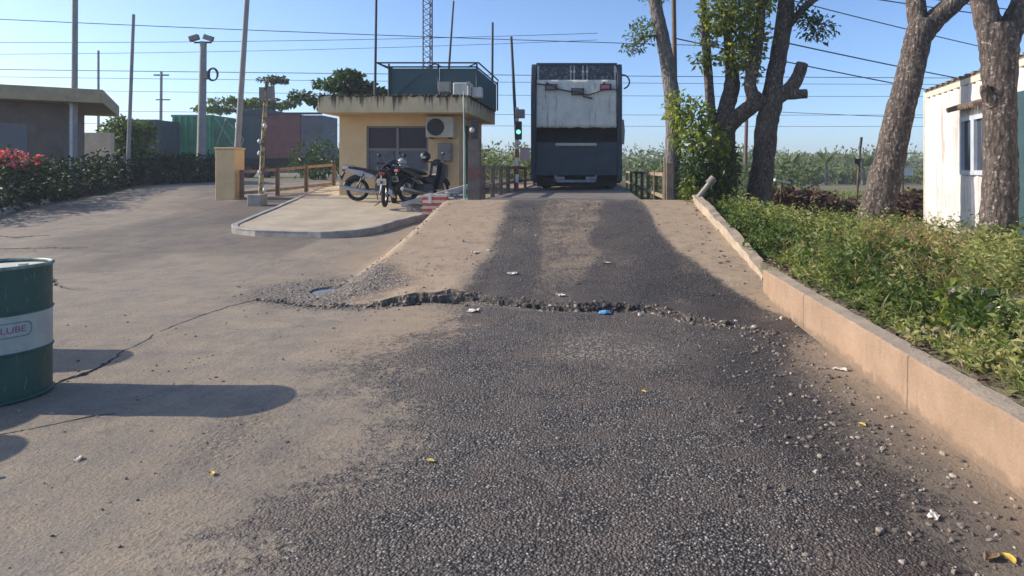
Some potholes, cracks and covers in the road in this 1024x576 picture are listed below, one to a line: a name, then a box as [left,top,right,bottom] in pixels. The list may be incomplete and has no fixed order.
crack [55,287,810,385]
crack [0,413,116,435]
pothole [597,302,634,313]
pothole [437,294,467,304]
pothole [381,295,426,307]
pothole [309,283,346,294]
